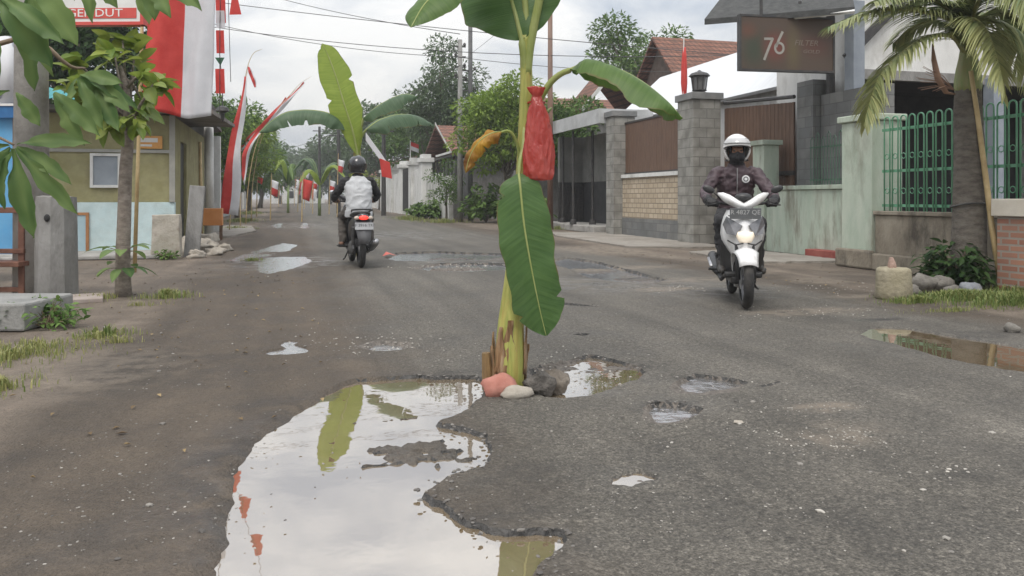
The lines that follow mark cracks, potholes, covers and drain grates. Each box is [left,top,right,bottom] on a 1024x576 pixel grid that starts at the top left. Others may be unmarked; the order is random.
pothole [252,256,316,274]
pothole [185,375,567,576]
pothole [385,251,503,261]
pothole [641,400,704,424]
pothole [850,326,1024,372]
pothole [357,341,415,351]
pothole [411,262,506,272]
pothole [669,373,748,395]
pothole [527,354,645,398]
pothole [225,242,301,262]
pothole [555,257,666,284]
